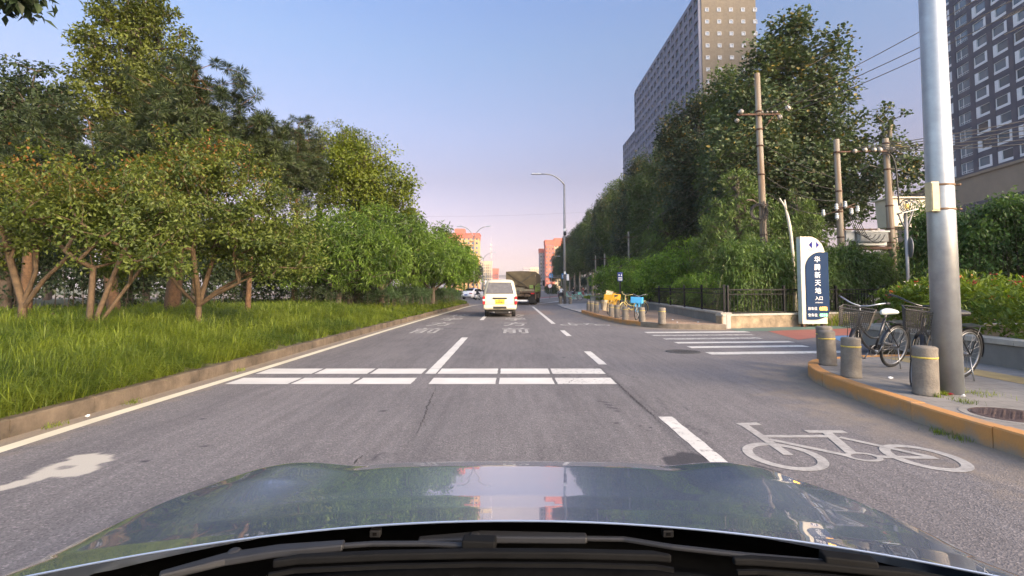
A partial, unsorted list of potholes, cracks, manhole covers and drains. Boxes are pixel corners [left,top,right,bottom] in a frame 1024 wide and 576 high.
manhole cover [958,406,1024,424]
